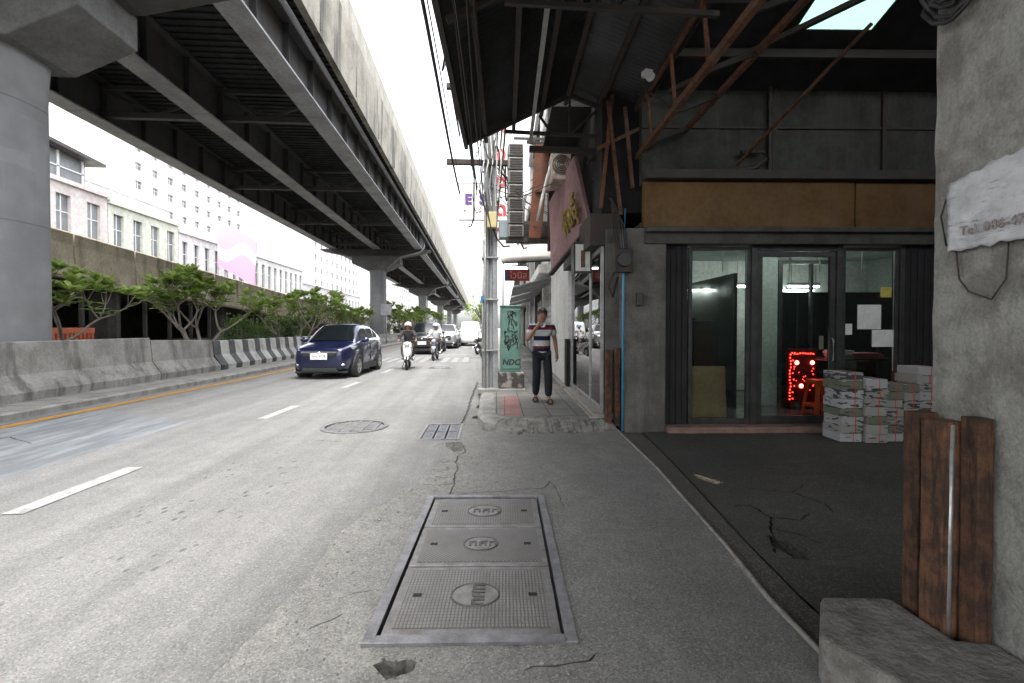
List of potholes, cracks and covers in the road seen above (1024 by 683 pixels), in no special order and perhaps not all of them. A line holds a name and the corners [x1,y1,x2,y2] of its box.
manhole cover [320,419,389,434]
manhole cover [360,495,579,648]
crack [525,654,596,671]
crack [722,484,834,553]
drain grate [417,423,464,446]
crack [424,443,564,507]
crack [461,381,478,426]
pothole [373,658,422,681]
